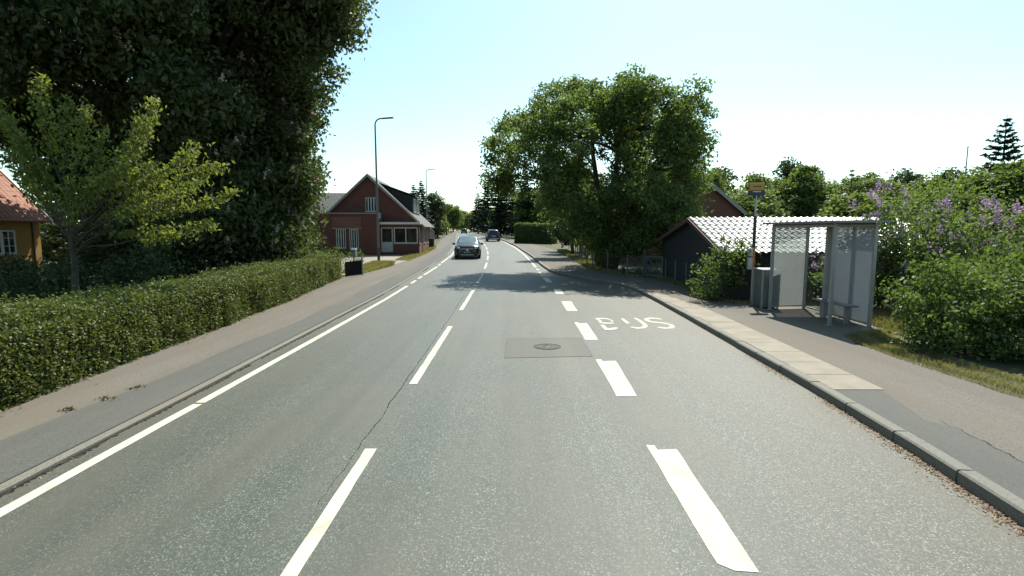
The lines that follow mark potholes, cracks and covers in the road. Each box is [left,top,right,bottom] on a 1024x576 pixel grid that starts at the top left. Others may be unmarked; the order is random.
crack [317,305,458,506]
